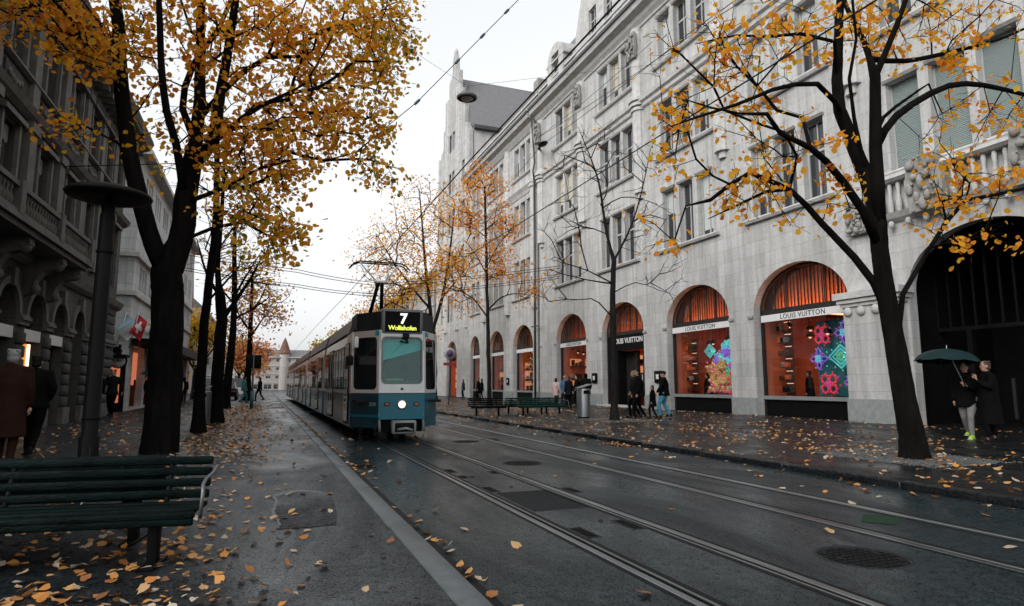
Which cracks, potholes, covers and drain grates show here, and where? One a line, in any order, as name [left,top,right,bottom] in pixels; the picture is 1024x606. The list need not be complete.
manhole cover [813,545,915,570]
